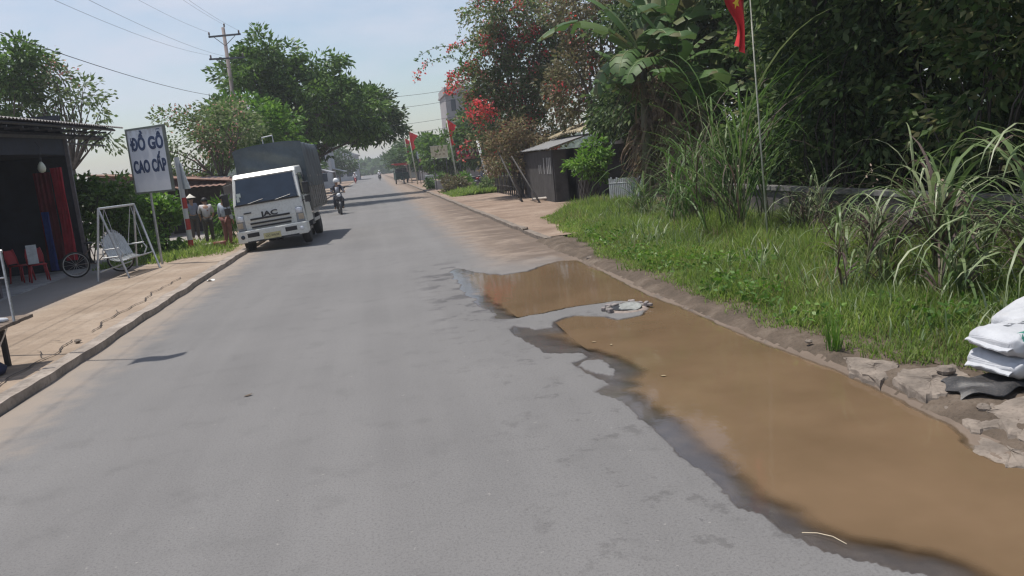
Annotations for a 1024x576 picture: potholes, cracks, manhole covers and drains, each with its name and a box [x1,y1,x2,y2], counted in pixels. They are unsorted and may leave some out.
pothole [448,259,660,320]
pothole [548,296,1024,576]
